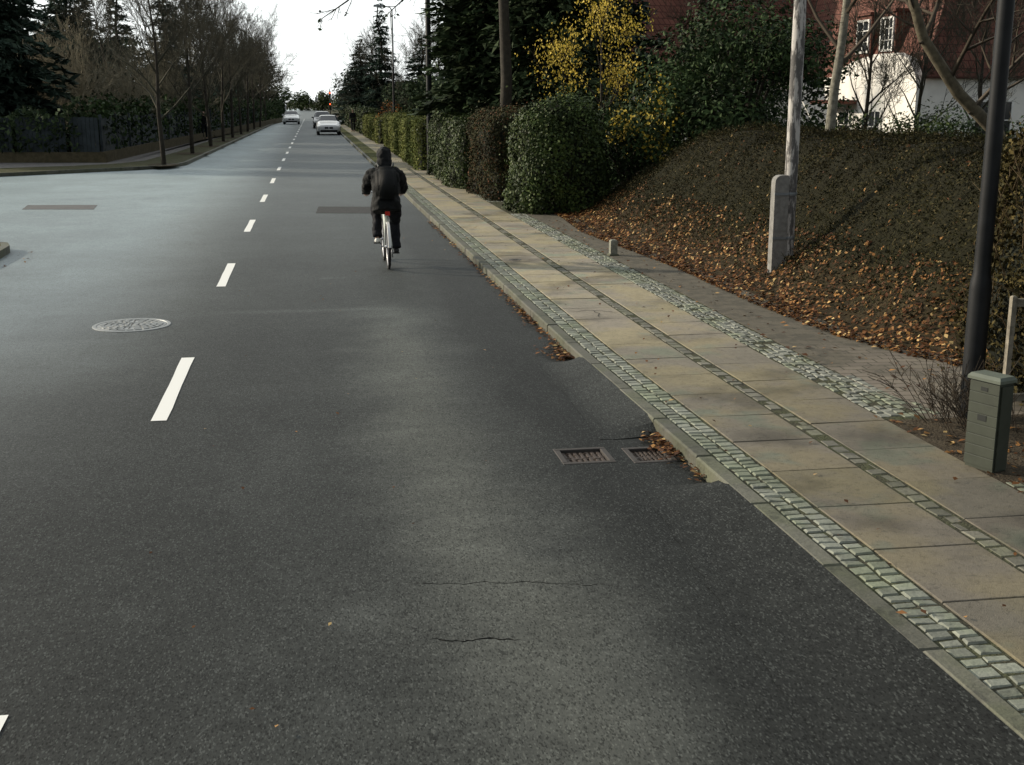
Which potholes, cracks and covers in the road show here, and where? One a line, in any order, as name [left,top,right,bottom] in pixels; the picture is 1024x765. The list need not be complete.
manhole cover [92,318,171,332]
drain grate [621,446,678,463]
drain grate [553,447,616,465]
